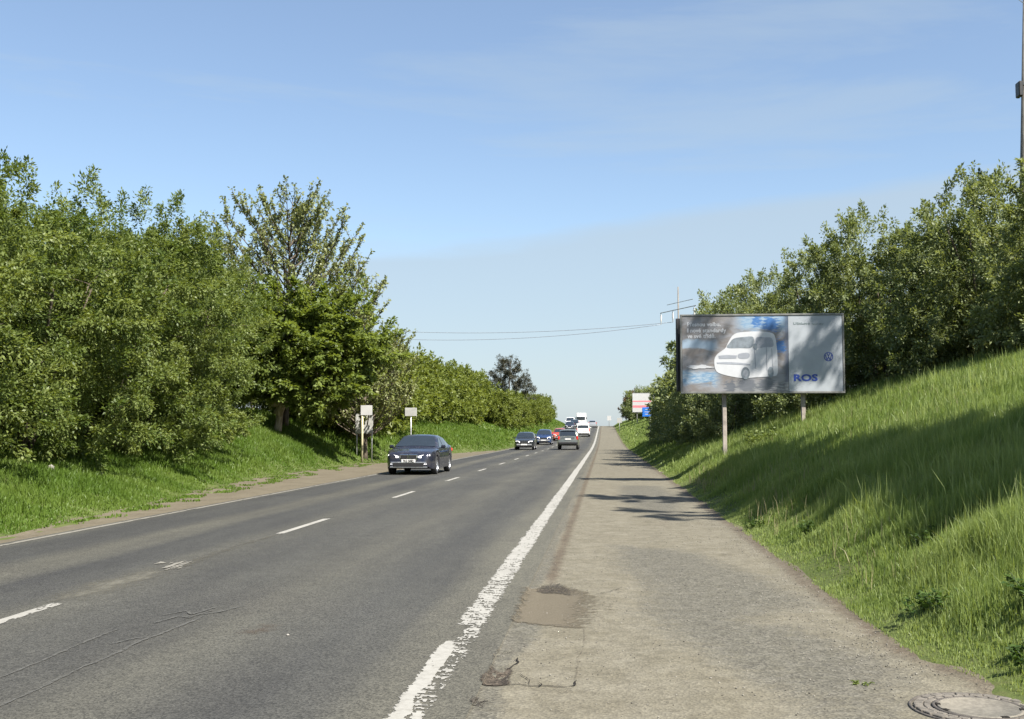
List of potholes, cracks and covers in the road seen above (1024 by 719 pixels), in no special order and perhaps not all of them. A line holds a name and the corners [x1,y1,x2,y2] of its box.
pothole [511,587,612,628]
pothole [480,666,512,686]
manhole cover [908,692,1024,719]
crack [114,605,244,649]
